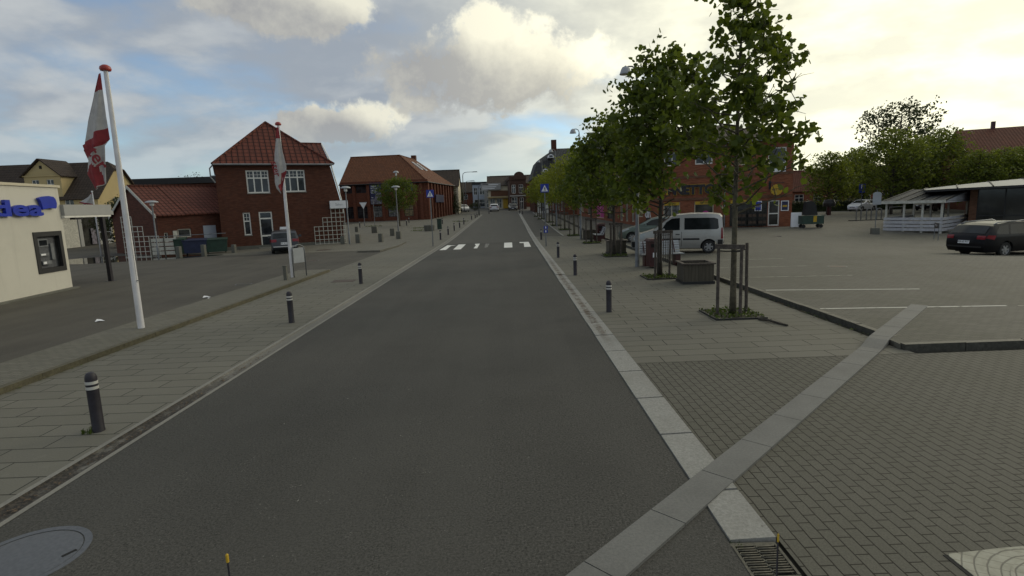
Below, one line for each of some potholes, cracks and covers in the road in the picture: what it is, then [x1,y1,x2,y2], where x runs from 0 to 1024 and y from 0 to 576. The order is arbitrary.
drain grate [730,542,802,576]
manhole cover [0,526,93,576]
manhole cover [943,546,1024,576]
